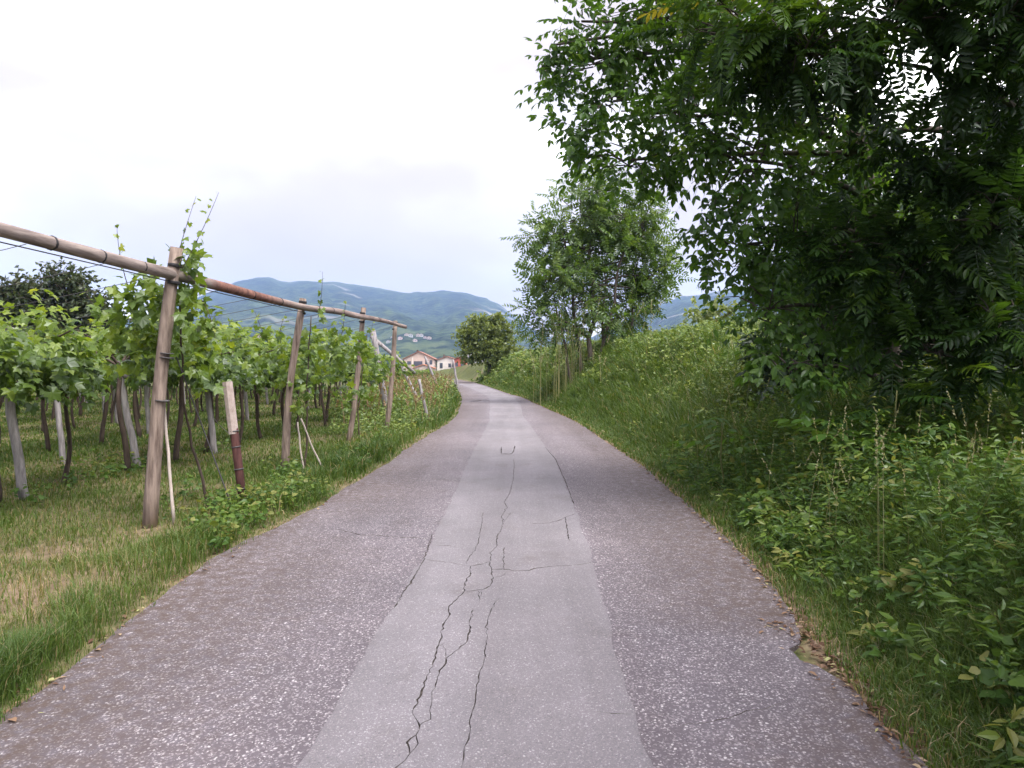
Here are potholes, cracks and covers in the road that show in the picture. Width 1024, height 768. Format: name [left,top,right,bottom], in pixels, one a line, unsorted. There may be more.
crack [395,460,591,768]
